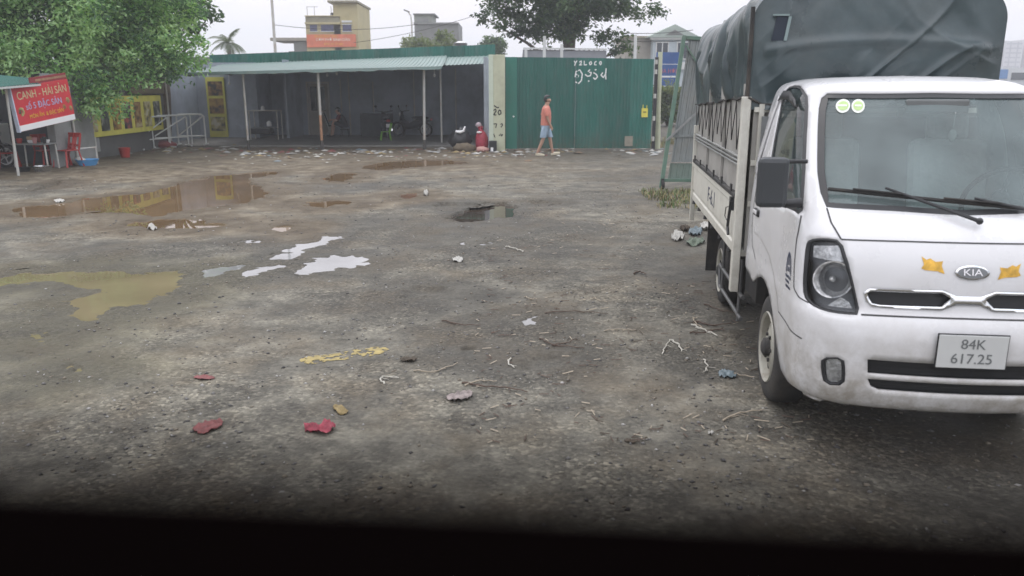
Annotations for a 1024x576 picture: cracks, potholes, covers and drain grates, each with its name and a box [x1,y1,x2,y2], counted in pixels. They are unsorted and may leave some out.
pothole [112,216,239,231]
pothole [439,202,523,223]
